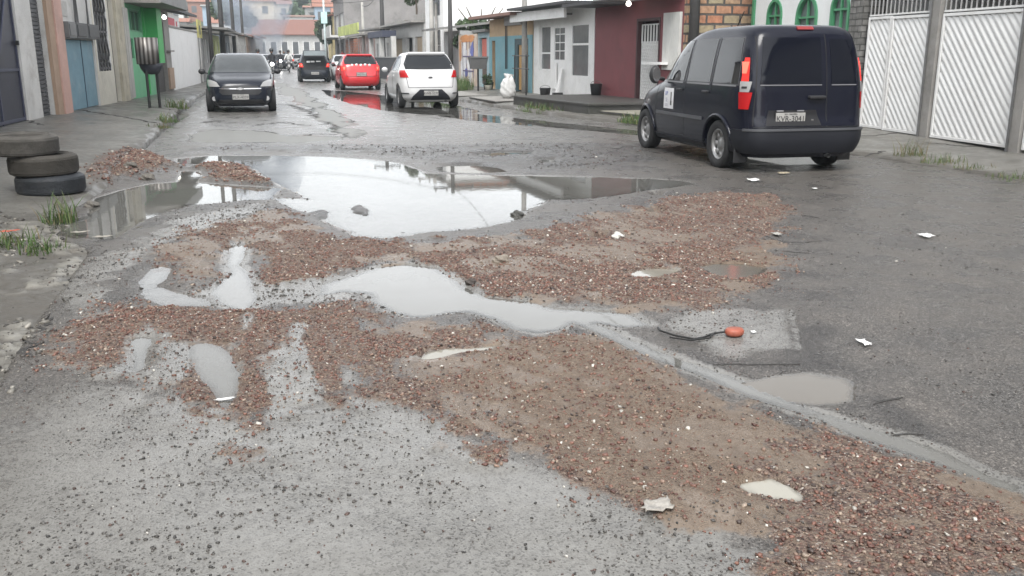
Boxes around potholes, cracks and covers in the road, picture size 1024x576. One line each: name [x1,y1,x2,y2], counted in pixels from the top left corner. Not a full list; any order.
pothole [742,369,874,408]
pothole [170,154,699,238]
pothole [310,260,836,423]
pothole [731,470,818,504]
pothole [816,414,1024,493]
